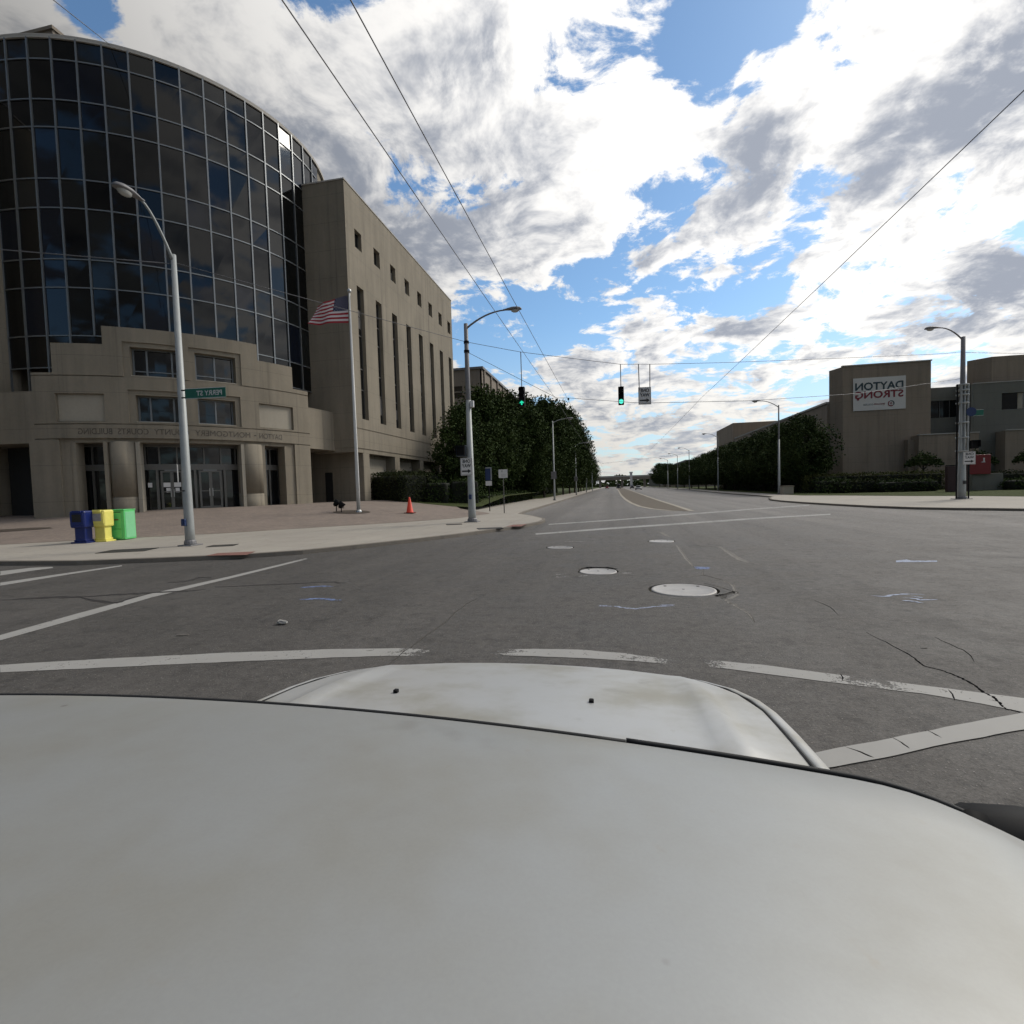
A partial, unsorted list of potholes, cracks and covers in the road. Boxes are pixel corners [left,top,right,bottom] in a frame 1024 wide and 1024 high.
manhole cover [648,583,720,597]
crack [866,632,1020,713]
crack [659,532,755,622]
